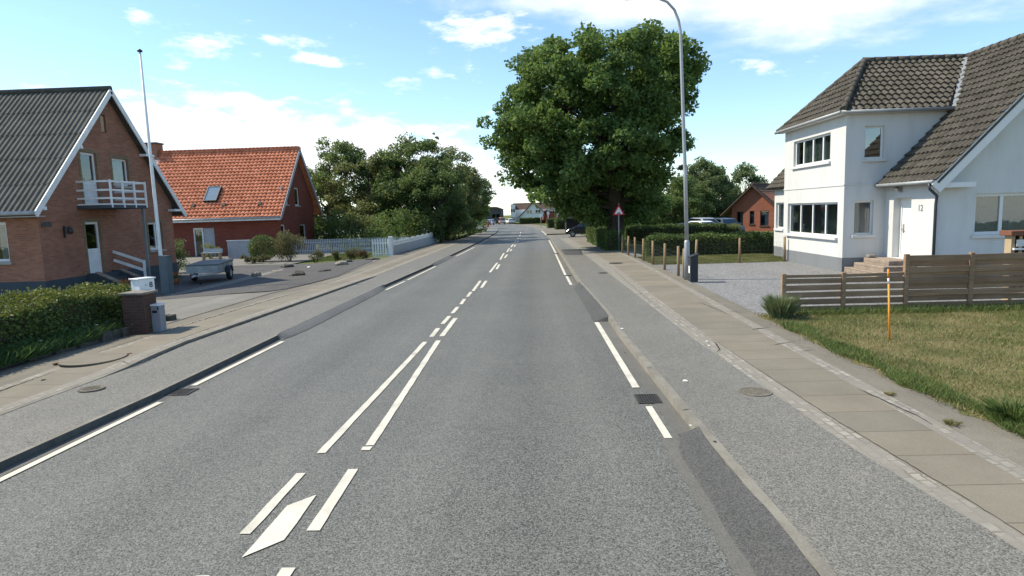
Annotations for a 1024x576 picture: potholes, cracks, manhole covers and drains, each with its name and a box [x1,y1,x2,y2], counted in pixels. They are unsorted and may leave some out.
drain grate [634,394,662,404]
manhole cover [77,385,105,393]
manhole cover [52,352,132,367]
manhole cover [739,387,772,397]
drain grate [165,388,199,396]
